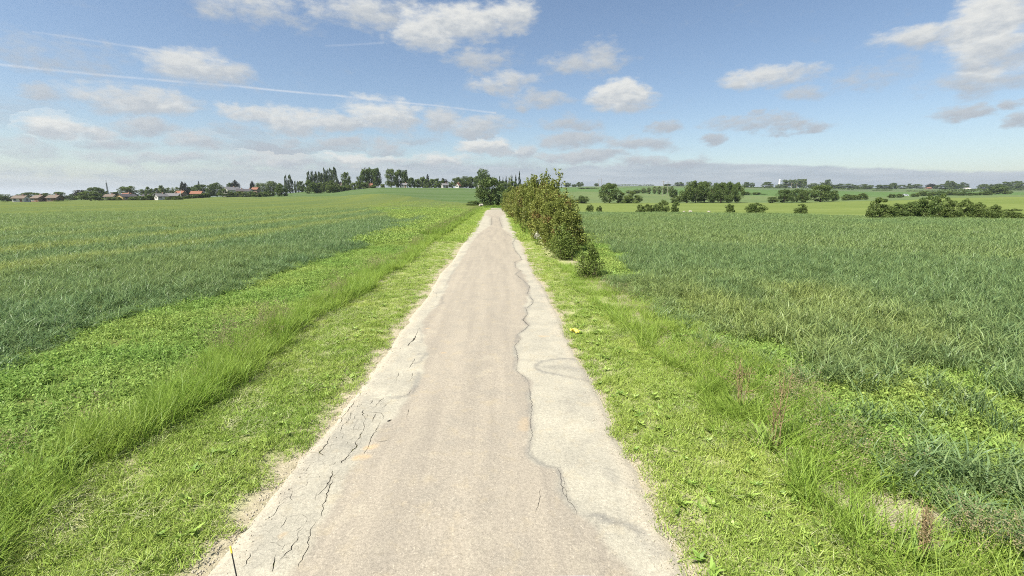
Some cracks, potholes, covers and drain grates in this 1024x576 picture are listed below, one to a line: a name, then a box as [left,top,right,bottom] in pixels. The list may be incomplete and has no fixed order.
crack [242,393,389,571]
